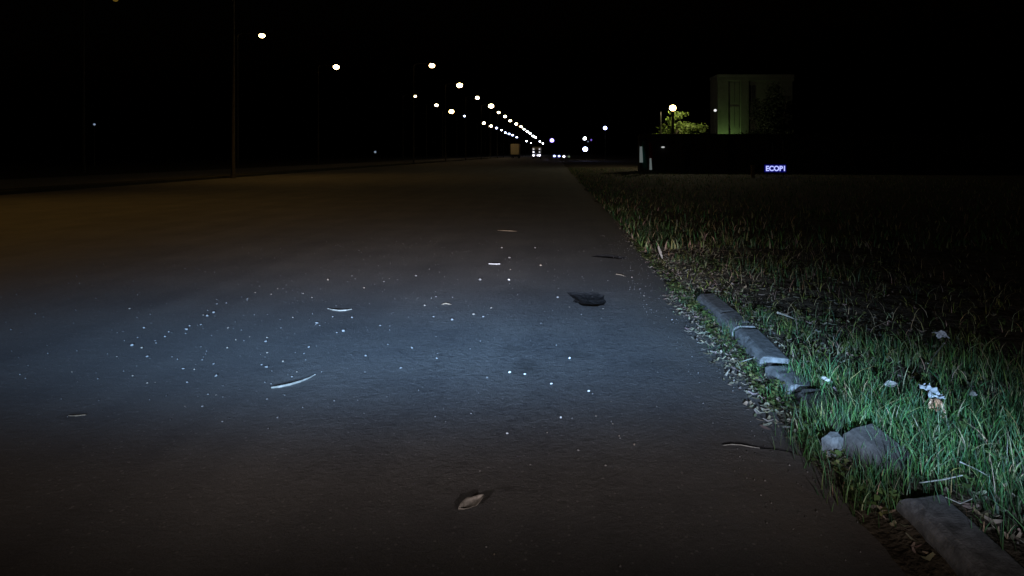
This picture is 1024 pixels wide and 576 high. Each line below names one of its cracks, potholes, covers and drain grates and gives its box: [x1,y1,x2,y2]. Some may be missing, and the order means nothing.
pothole [566,292,606,306]
crack [722,441,796,453]
